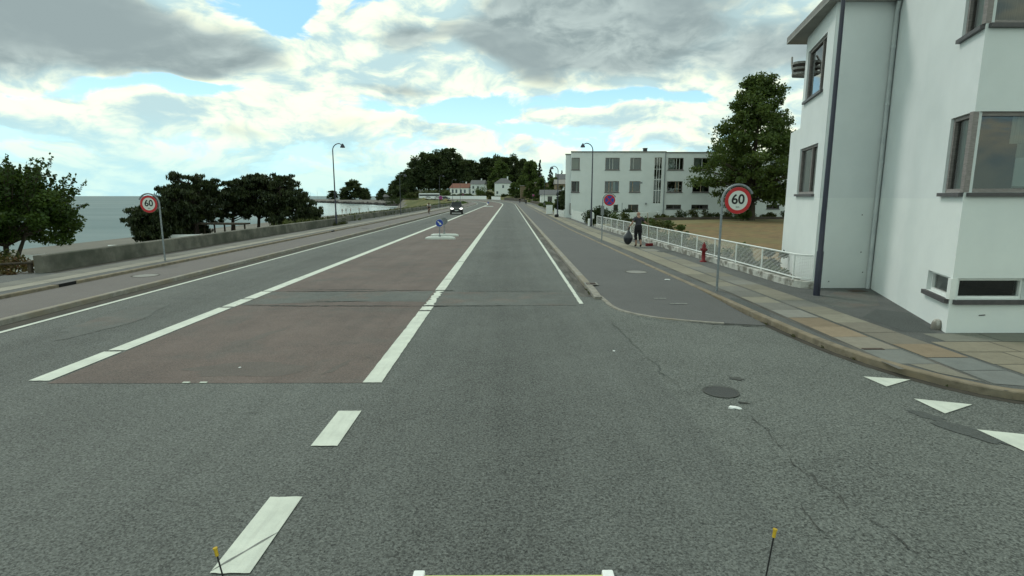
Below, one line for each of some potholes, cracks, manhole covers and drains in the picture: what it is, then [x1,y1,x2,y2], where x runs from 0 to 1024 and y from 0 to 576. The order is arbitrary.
crack [746,414,920,557]
manhole cover [702,385,740,398]
